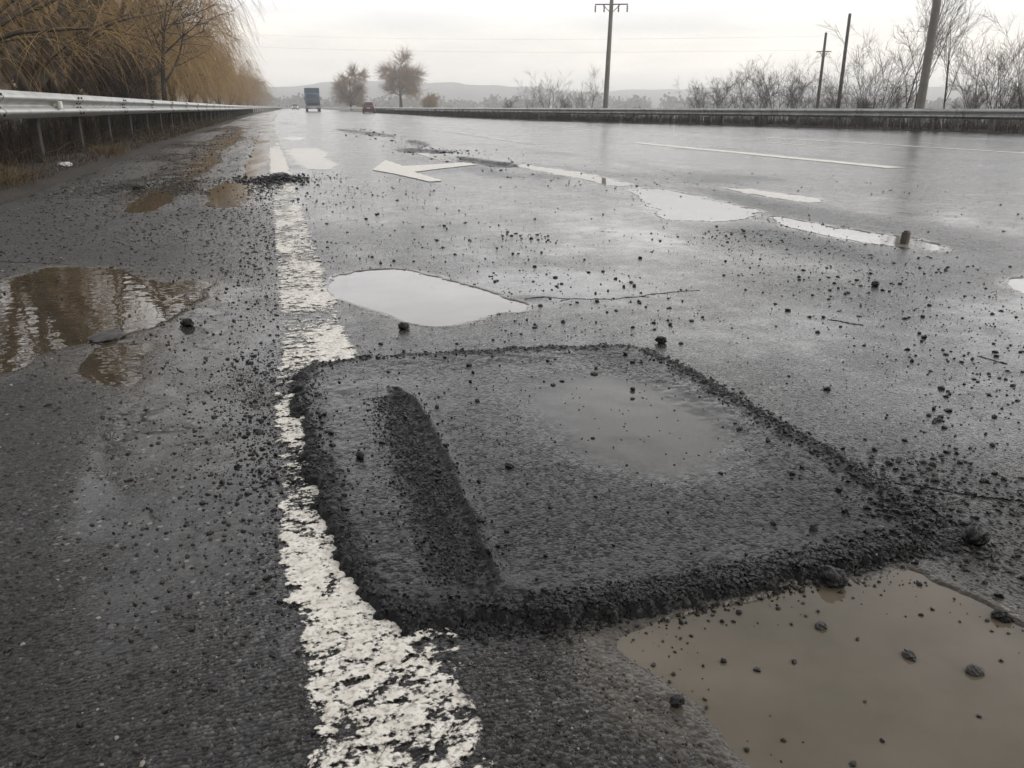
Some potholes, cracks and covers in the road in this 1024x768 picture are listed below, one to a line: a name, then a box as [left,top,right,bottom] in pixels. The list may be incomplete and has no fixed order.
pothole [583,561,1024,768]
pothole [321,268,532,327]
pothole [631,188,763,222]
crack [525,290,700,301]
crack [894,481,1024,506]
